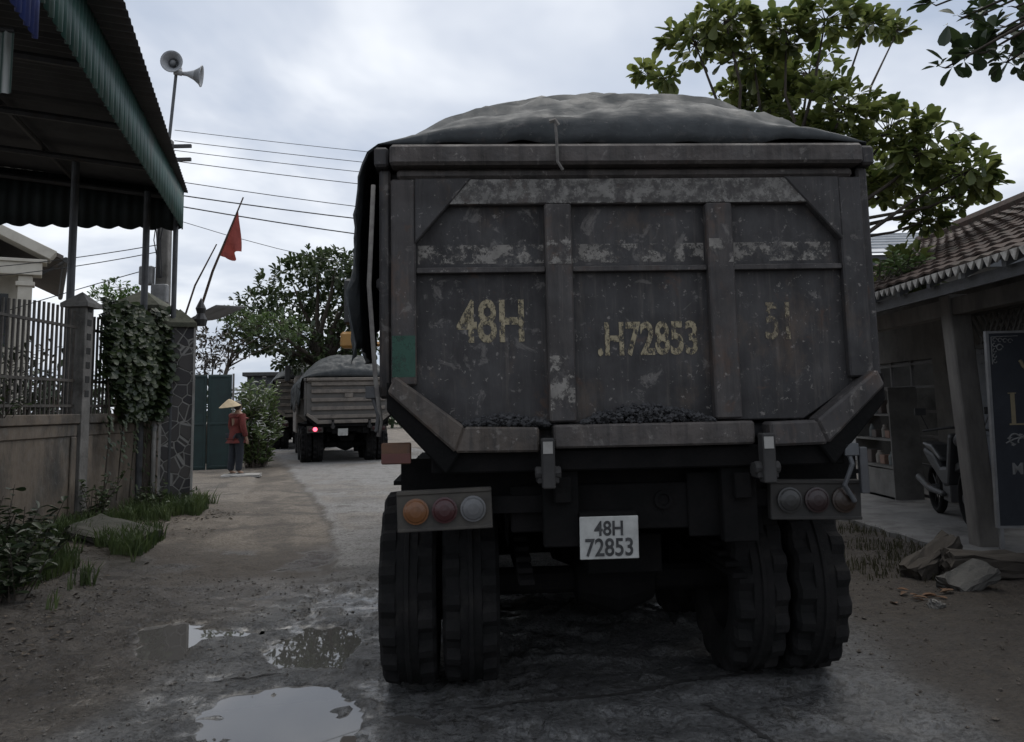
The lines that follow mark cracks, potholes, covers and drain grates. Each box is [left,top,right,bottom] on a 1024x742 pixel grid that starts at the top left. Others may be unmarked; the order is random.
pothole [119,616,293,664]
pothole [249,619,375,671]
pothole [177,677,376,742]
